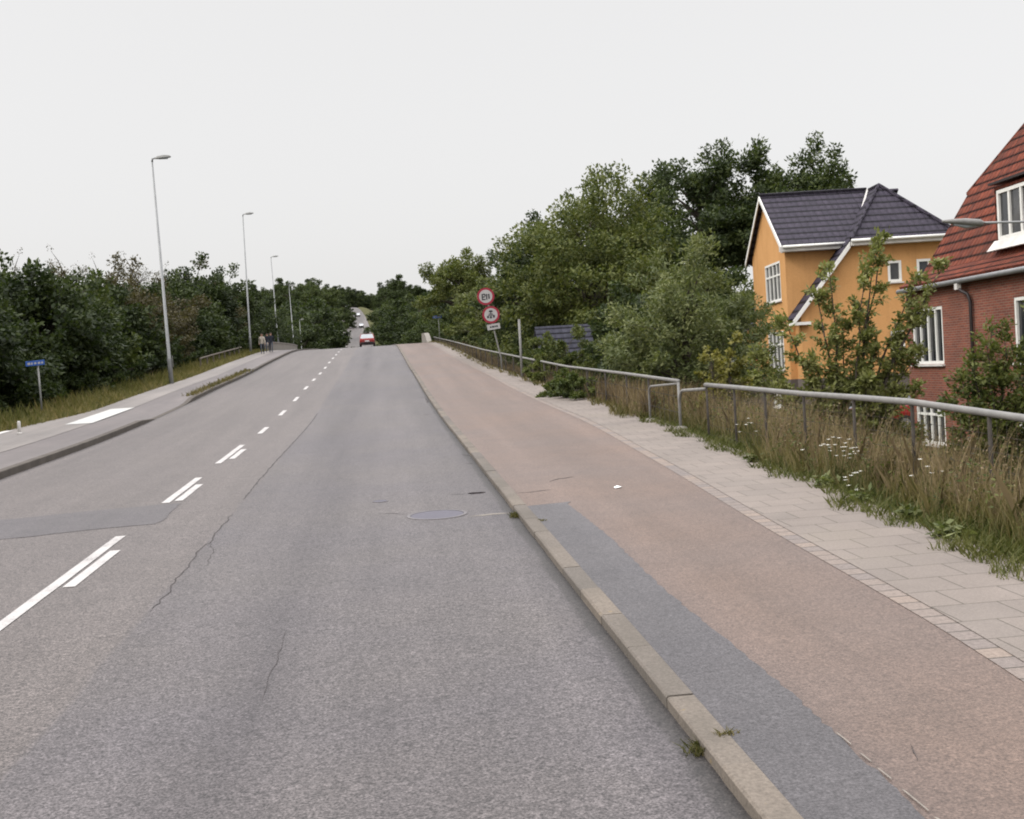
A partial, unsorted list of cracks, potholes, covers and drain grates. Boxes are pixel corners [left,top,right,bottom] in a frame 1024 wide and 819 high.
crack [150,413,318,611]
crack [262,630,286,699]
manhole cover [407,509,467,520]
